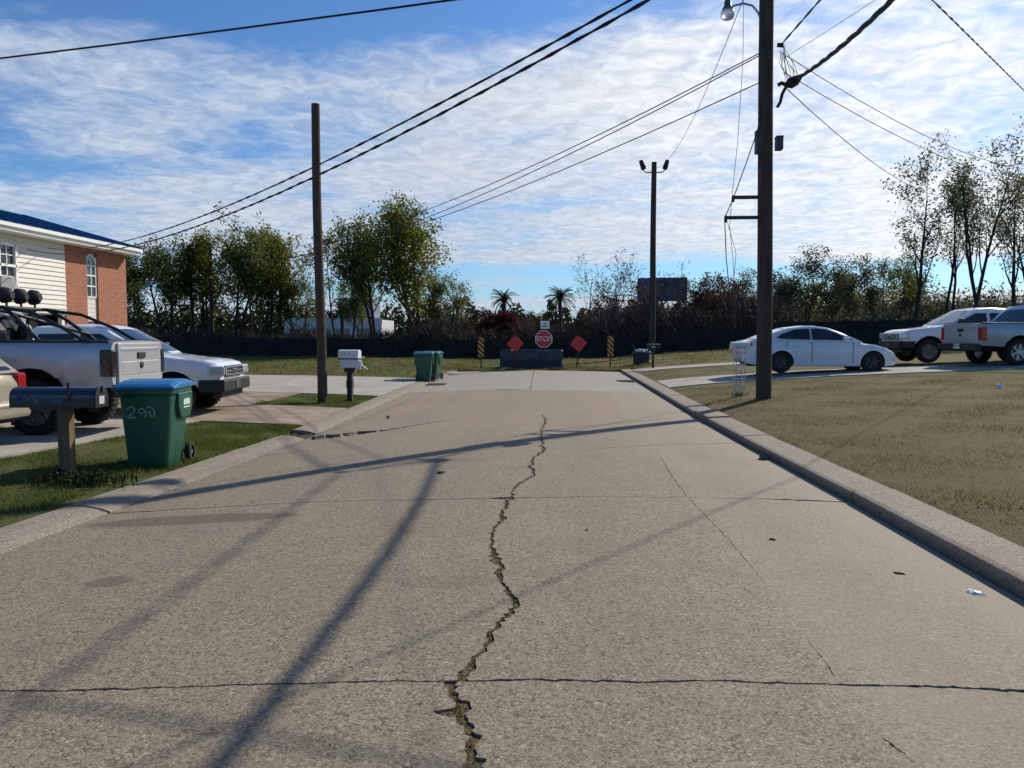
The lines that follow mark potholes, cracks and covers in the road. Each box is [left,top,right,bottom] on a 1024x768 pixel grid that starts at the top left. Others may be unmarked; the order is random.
crack [0,414,1024,768]
